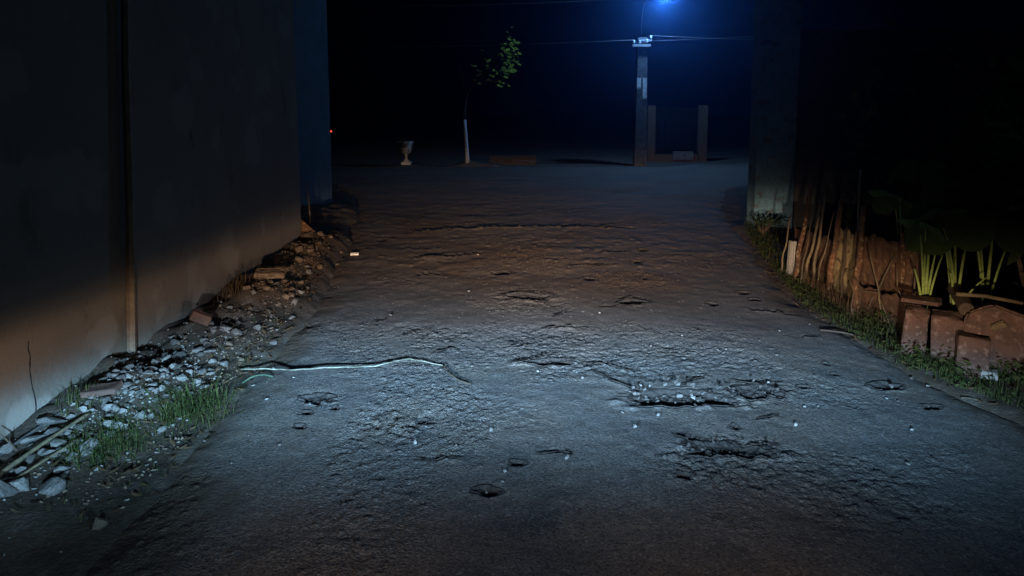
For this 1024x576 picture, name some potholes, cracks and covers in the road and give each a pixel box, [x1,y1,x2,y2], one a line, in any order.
pothole [724,382,789,401]
pothole [615,298,653,306]
pothole [297,393,340,405]
pothole [626,388,741,408]
pothole [469,484,506,497]
pothole [864,380,906,391]
pothole [499,291,557,301]
pothole [680,440,777,461]
